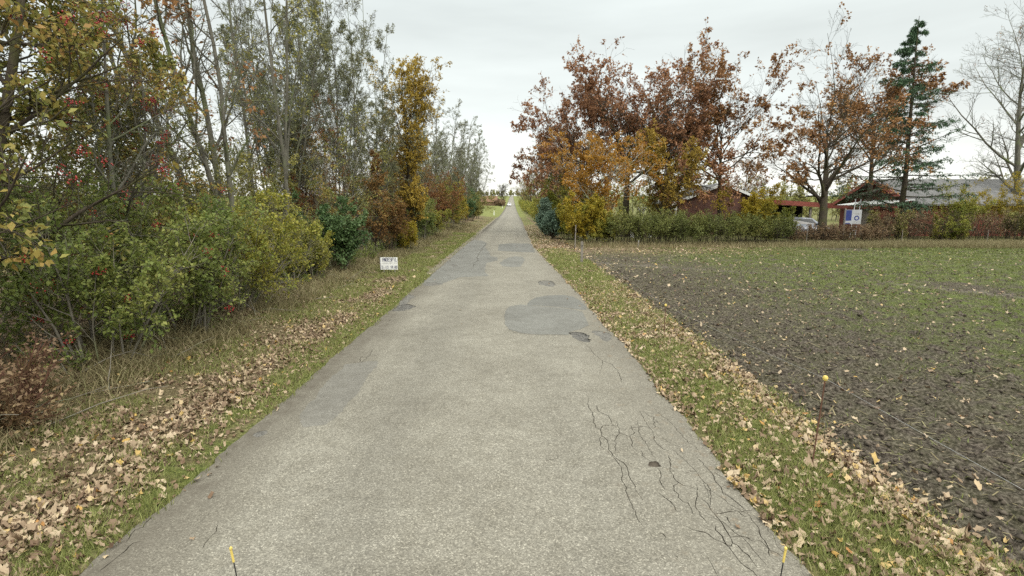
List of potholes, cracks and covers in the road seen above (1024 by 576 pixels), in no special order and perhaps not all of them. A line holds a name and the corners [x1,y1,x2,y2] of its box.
crack [587,399,784,576]
crack [100,517,152,571]
pothole [569,332,591,342]
